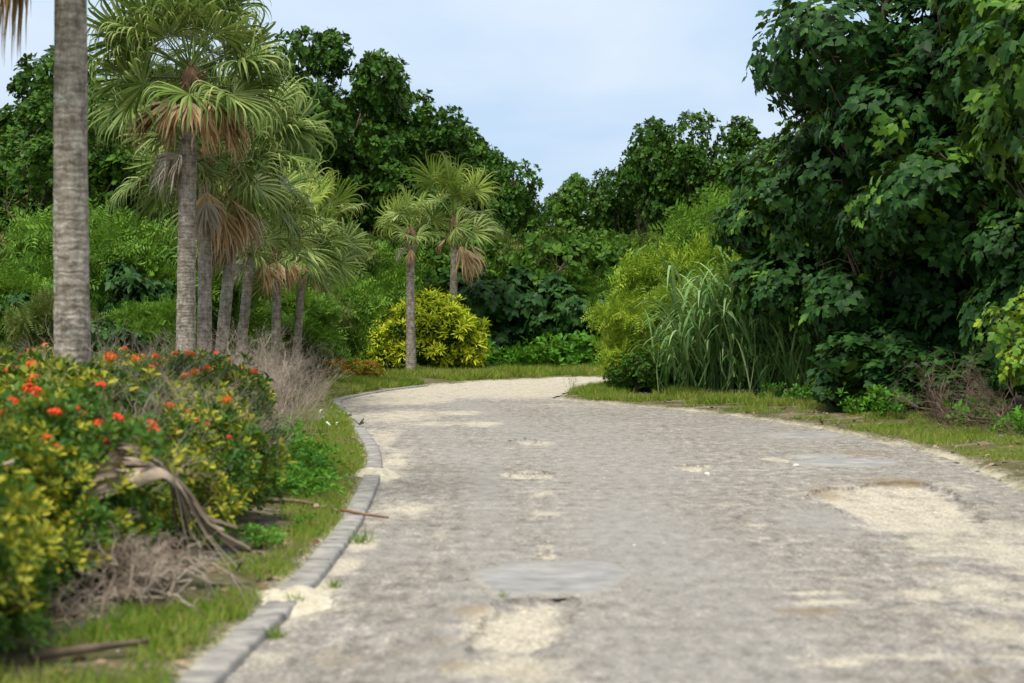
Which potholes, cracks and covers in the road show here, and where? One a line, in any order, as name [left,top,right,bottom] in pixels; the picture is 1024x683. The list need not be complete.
pothole [503,470,559,479]
pothole [805,481,991,527]
pothole [508,437,544,445]
pothole [672,463,707,472]
pothole [461,596,592,659]
